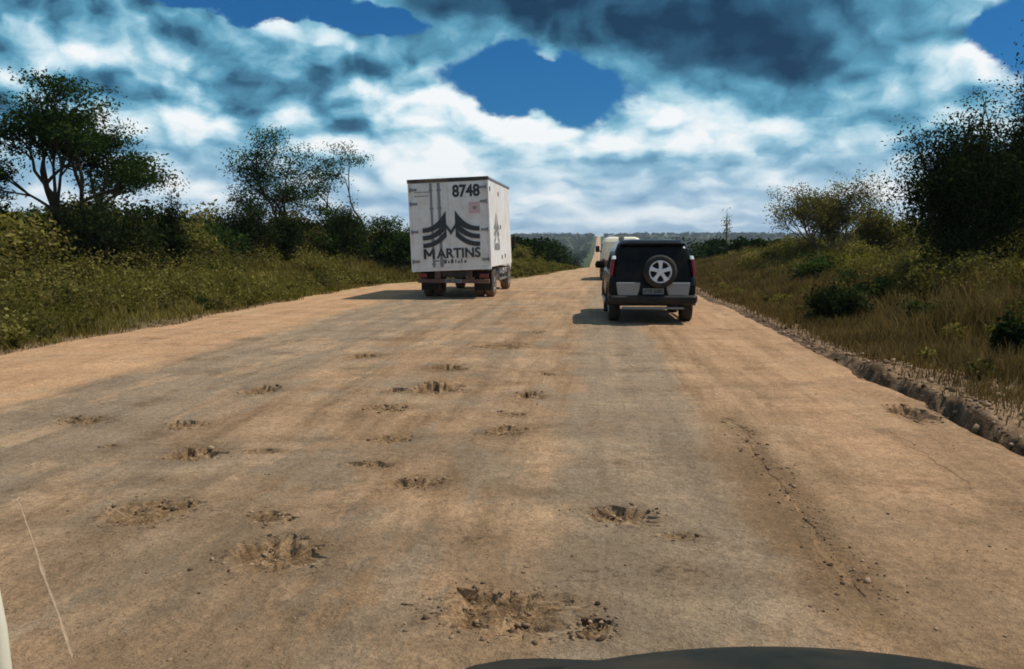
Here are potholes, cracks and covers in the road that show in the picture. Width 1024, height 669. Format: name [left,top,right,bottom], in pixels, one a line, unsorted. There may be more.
crack [728,418,865,596]
pothole [345,461,397,469]
pothole [516,391,552,399]
pothole [224,533,331,574]
pothole [574,618,616,642]
pothole [409,381,467,396]
pothole [582,505,661,528]
pothole [88,499,208,528]
pothole [240,384,280,395]
pothole [51,417,114,425]
pothole [383,476,444,490]
pothole [436,587,589,640]
